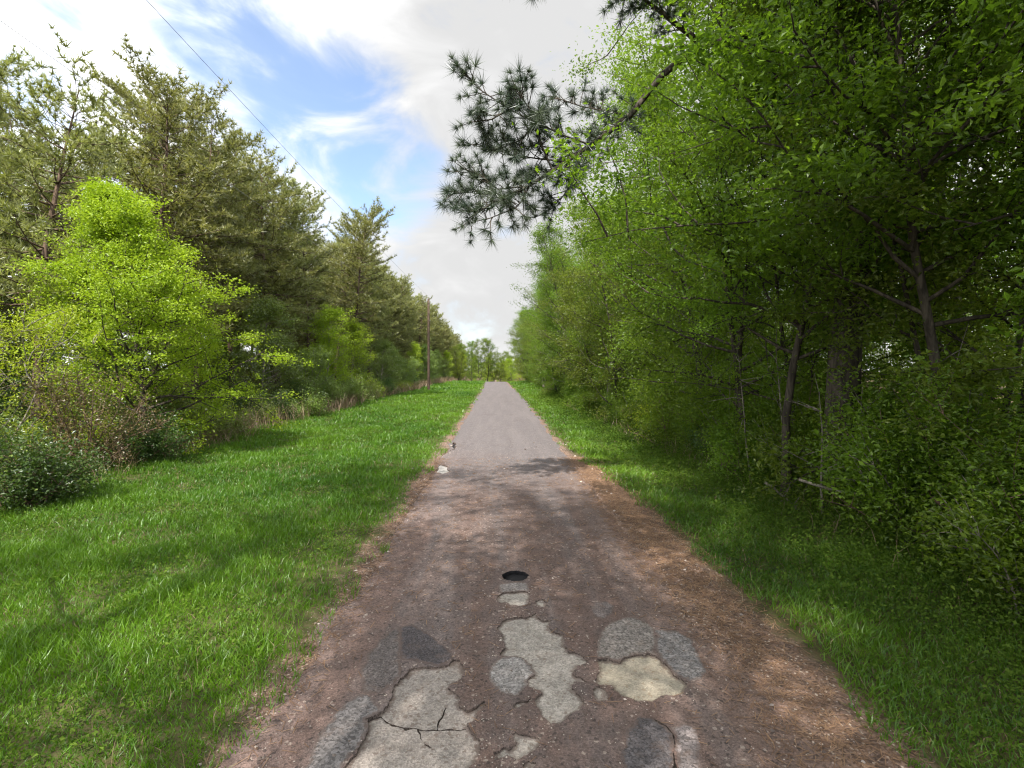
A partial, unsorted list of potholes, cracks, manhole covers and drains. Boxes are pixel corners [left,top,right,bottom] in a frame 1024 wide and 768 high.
pothole [497,613,589,724]
pothole [343,659,485,768]
crack [365,708,466,748]
pothole [502,571,529,582]
pothole [595,653,688,702]
